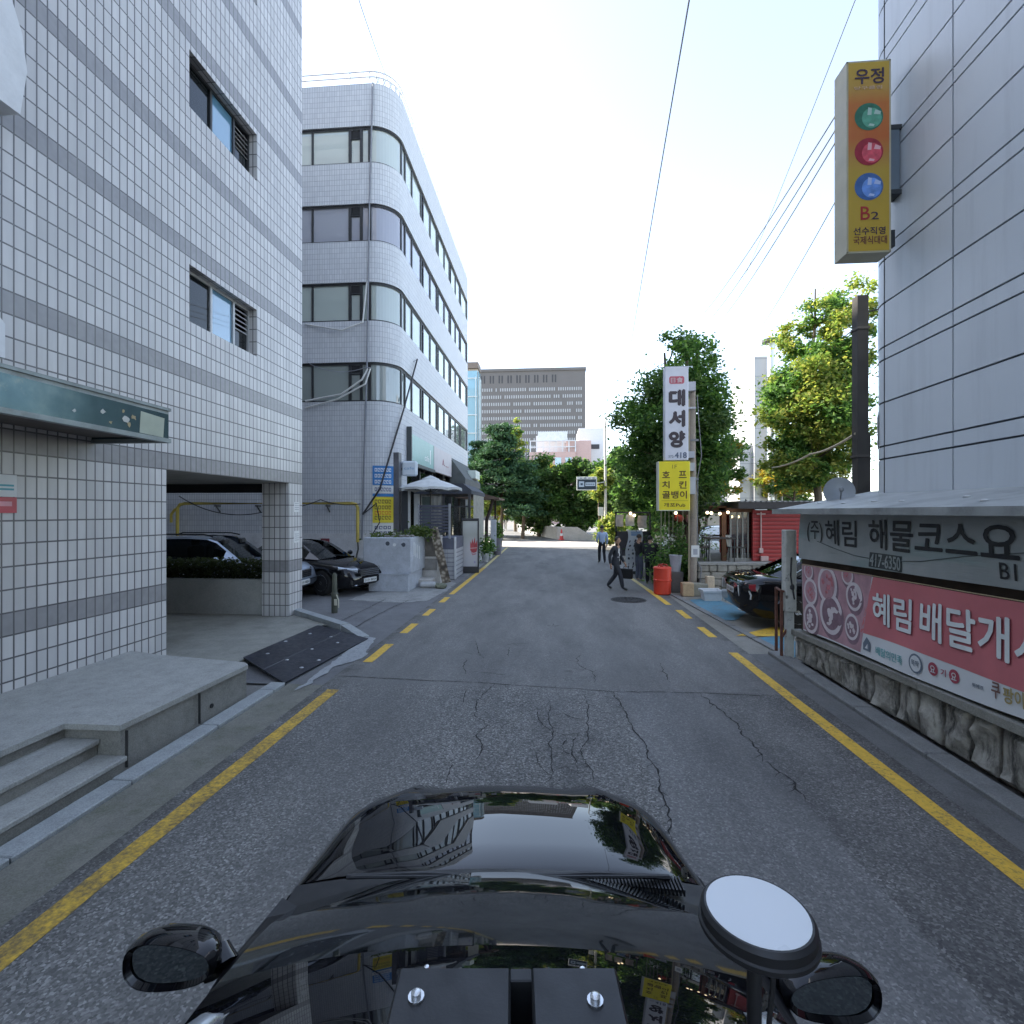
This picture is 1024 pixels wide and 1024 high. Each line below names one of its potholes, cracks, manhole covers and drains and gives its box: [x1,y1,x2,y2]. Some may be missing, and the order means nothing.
crack [335,641,760,781]
